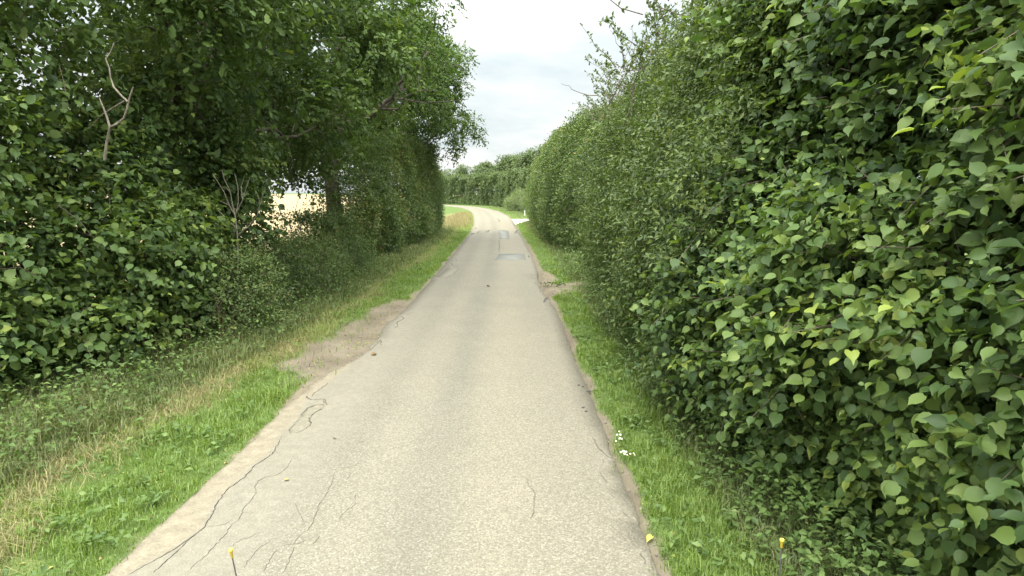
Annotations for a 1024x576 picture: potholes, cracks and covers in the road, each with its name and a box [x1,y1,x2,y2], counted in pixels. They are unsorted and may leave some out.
crack [126,383,358,576]
